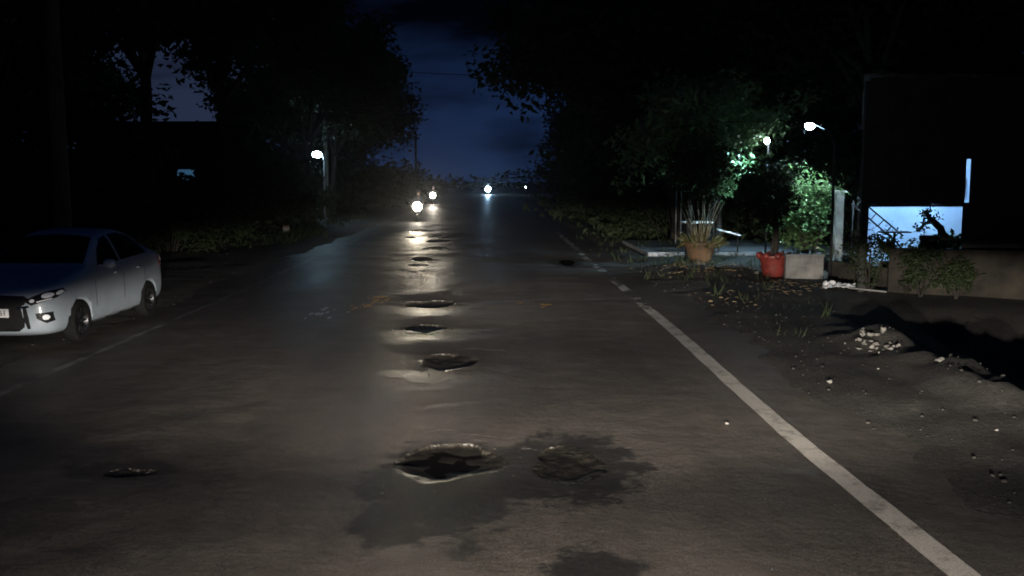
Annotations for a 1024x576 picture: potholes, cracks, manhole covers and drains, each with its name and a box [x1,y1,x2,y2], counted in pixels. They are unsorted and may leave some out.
pothole [420,354,478,372]
pothole [558,259,576,267]
pothole [392,443,511,484]
pothole [103,468,159,478]
pothole [405,300,455,309]
pothole [400,324,448,333]
pothole [531,445,610,486]
